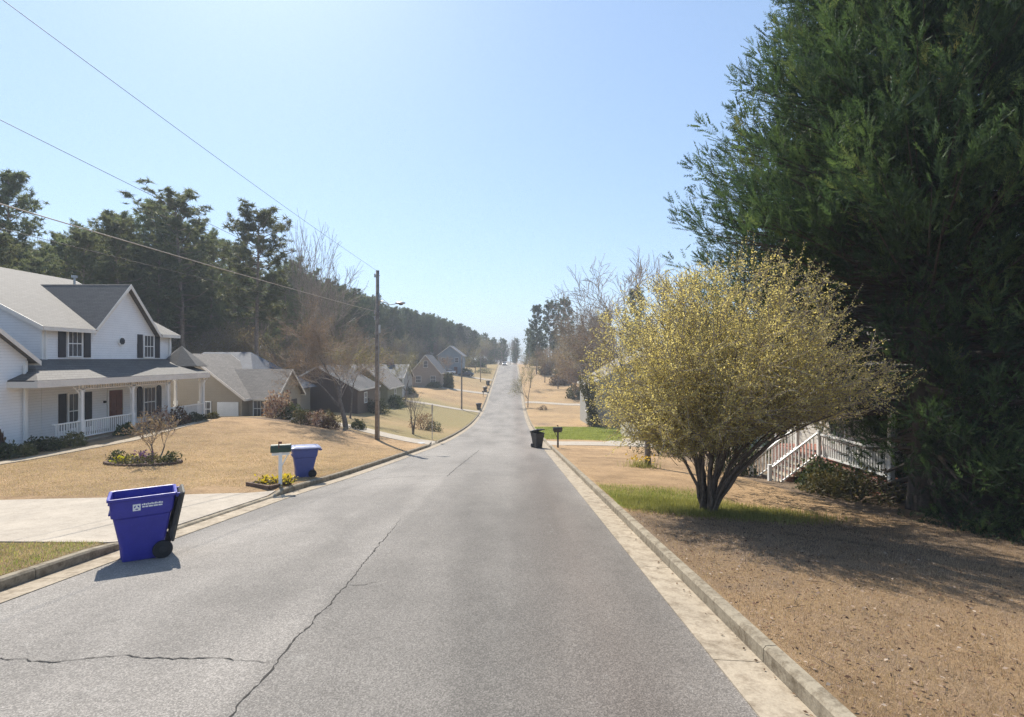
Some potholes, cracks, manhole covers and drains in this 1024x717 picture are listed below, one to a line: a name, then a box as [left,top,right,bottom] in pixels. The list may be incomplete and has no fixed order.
crack [1,520,400,717]
